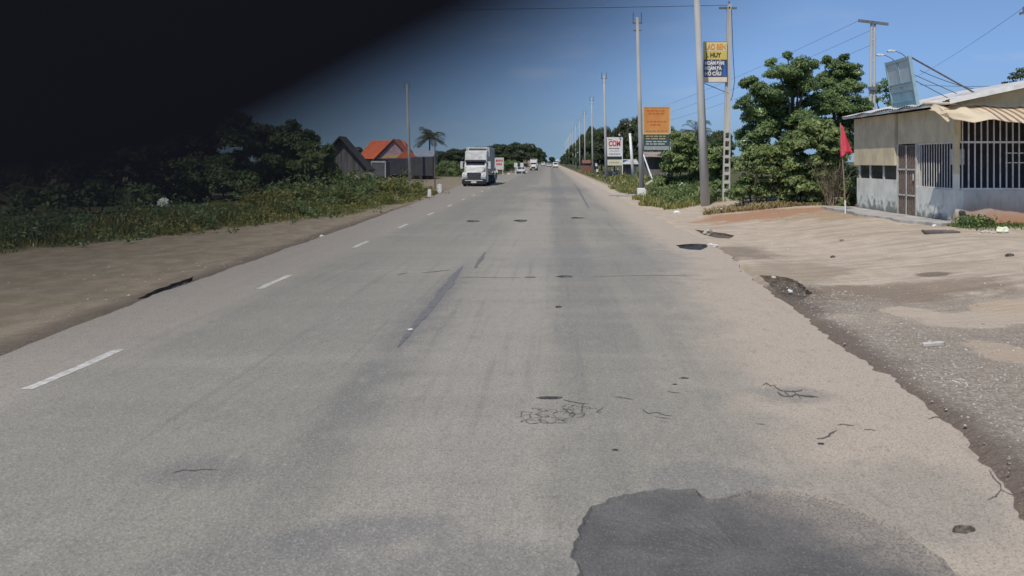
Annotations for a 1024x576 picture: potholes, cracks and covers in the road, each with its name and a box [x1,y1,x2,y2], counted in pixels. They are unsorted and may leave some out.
crack [763,382,812,399]
pothole [138,277,193,299]
crack [517,396,672,424]
pothole [695,229,734,238]
pothole [759,275,812,300]
